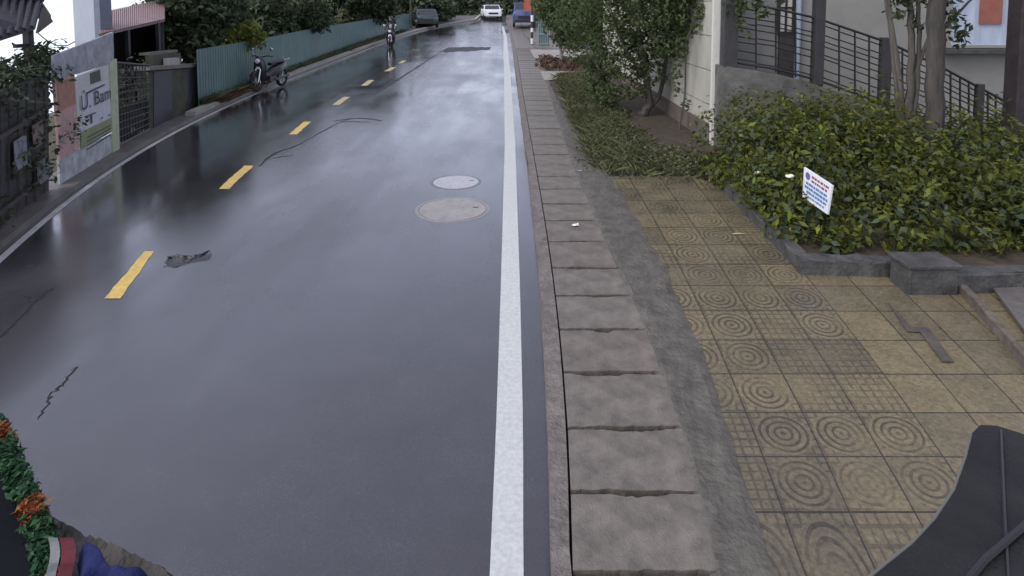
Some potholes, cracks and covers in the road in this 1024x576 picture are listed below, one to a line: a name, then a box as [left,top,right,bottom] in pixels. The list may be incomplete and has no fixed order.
crack [259,118,383,166]
manhole cover [415,197,490,223]
pothole [163,250,214,268]
crack [37,367,77,419]
crack [0,288,53,337]
manhole cover [430,175,481,190]
